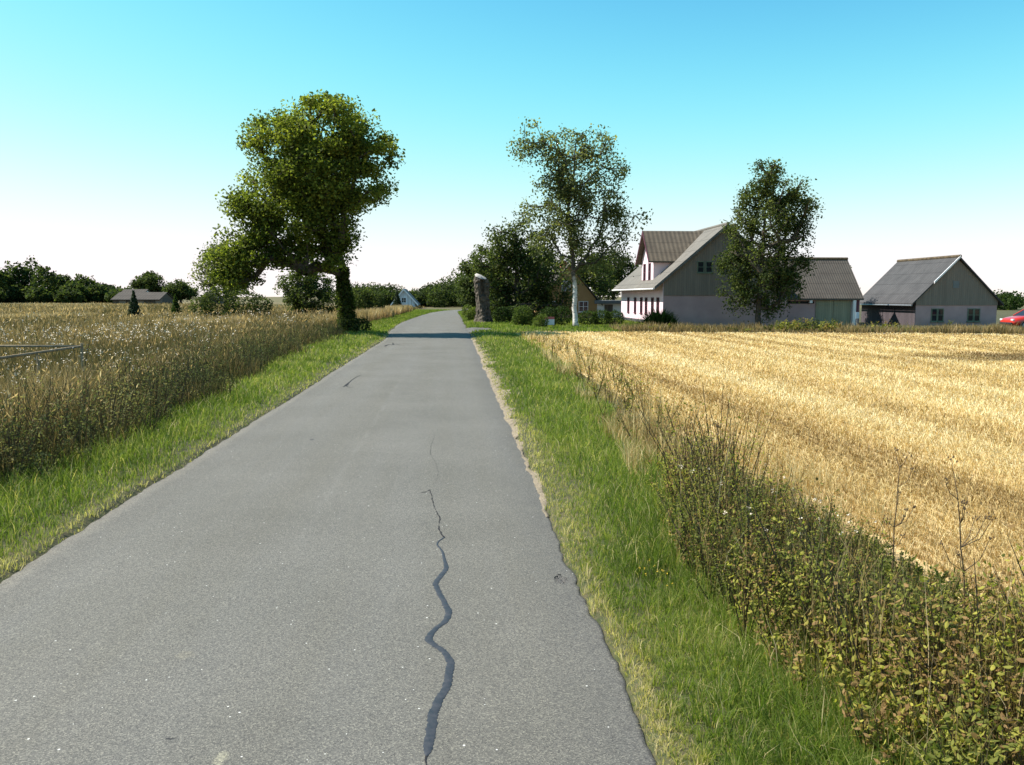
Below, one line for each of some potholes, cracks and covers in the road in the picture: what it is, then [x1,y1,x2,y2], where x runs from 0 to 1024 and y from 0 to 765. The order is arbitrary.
crack [421,429,455,765]
